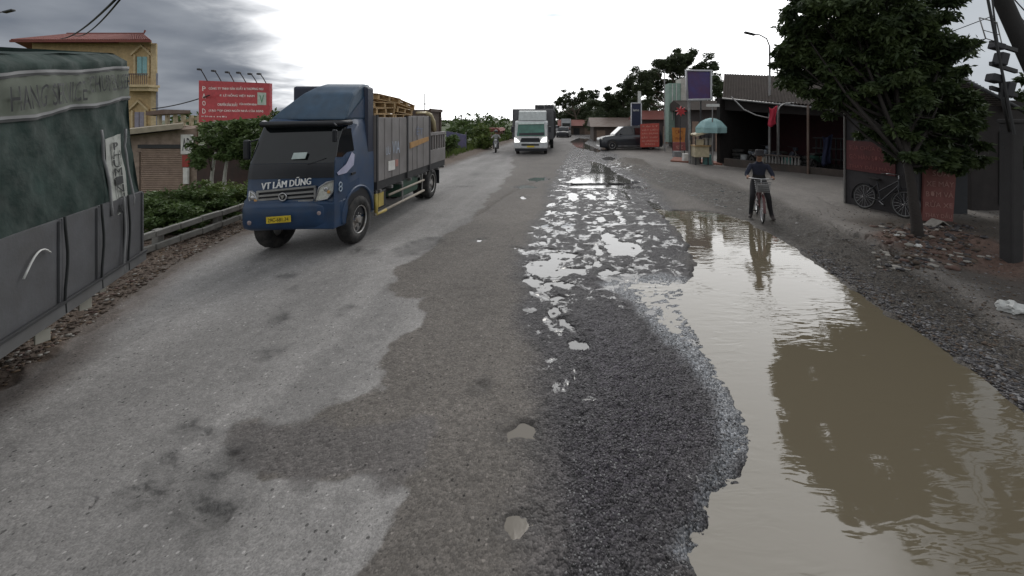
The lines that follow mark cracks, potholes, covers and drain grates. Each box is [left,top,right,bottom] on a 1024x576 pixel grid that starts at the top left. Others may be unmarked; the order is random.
pothole [500,512,537,541]
pothole [521,275,555,294]
pothole [547,305,563,318]
pothole [599,232,645,258]
pothole [624,208,1024,576]
pothole [597,267,621,276]
pothole [556,318,576,329]
pothole [566,338,591,350]
pothole [502,422,541,444]
pothole [566,161,640,184]
pothole [549,295,573,305]
pothole [560,221,576,233]
